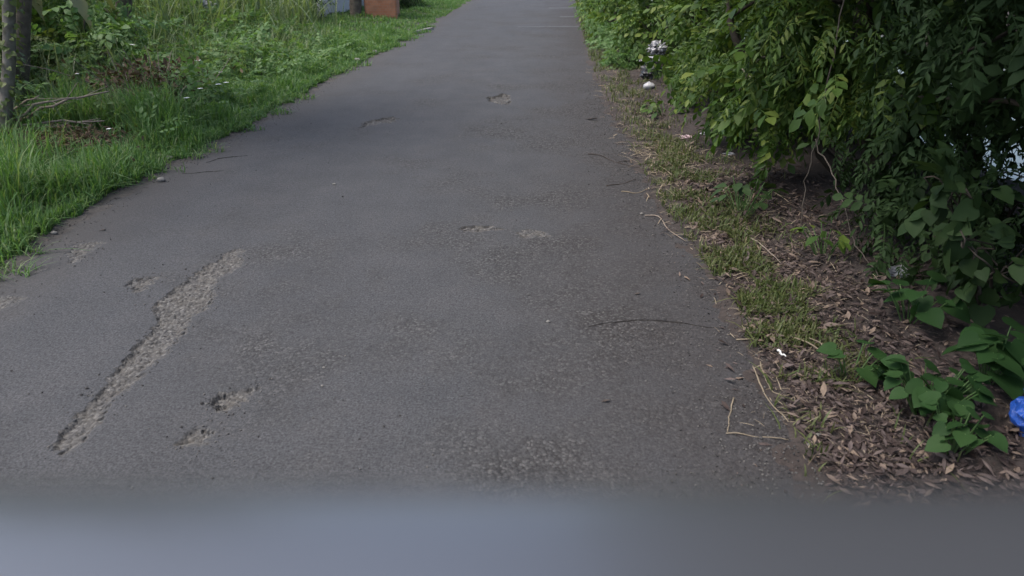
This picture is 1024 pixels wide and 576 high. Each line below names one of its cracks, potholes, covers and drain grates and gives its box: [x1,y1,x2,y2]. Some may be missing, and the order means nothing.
crack [589,319,719,328]
pothole [50,247,248,458]
pothole [486,93,513,105]
pothole [209,385,262,415]
pothole [64,241,108,265]
pothole [458,225,506,233]
pothole [359,116,400,128]
